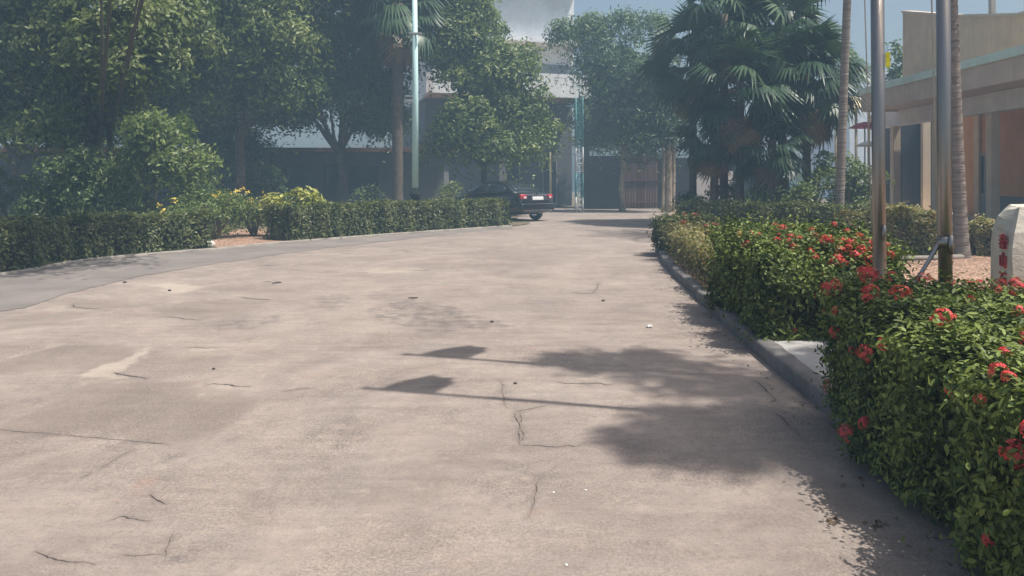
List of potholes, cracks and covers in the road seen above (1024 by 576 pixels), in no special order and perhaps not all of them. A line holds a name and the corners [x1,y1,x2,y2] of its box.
crack [35,551,95,565]
crack [111,495,166,521]
crack [501,383,581,447]
